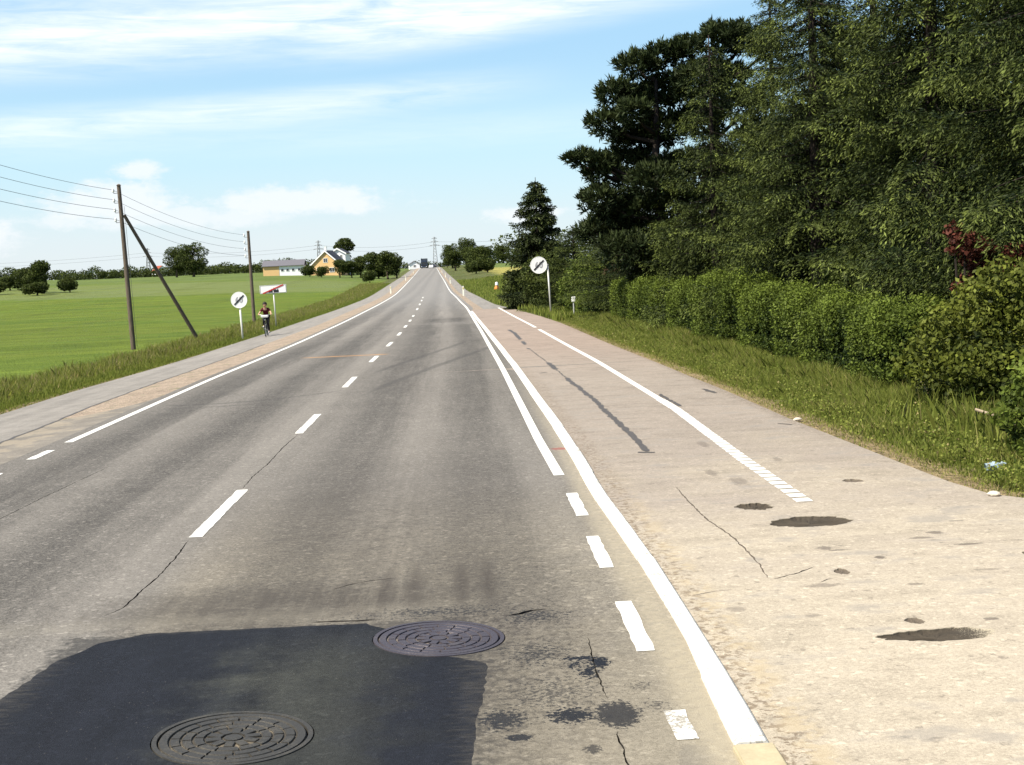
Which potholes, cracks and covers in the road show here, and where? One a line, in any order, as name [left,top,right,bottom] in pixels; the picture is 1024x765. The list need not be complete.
crack [675,486,832,595]
pothole [875,627,996,642]
pothole [770,516,853,527]
crack [109,542,187,614]
manhole cover [151,711,314,765]
crack [588,639,629,765]
manhole cover [373,621,505,657]
